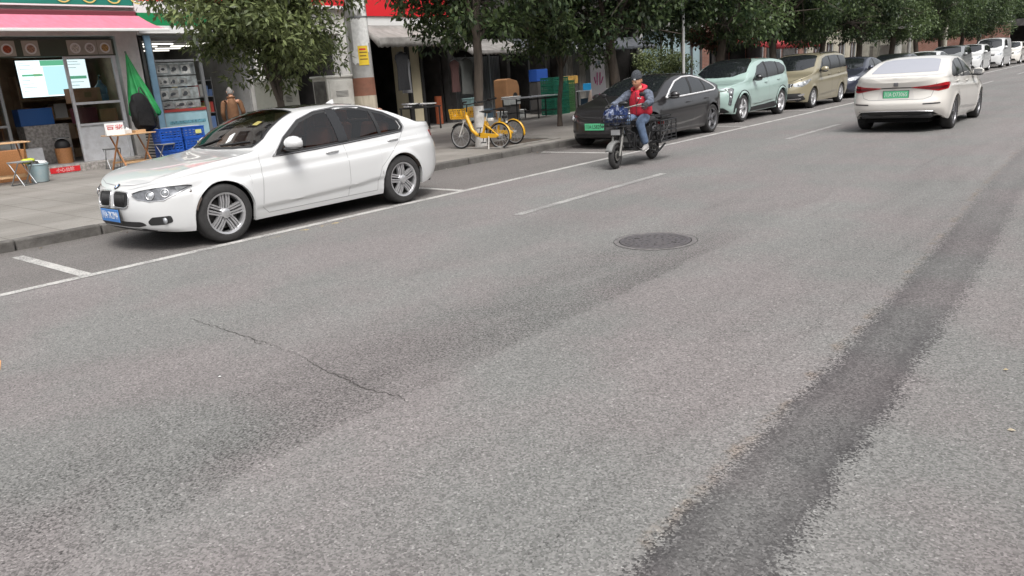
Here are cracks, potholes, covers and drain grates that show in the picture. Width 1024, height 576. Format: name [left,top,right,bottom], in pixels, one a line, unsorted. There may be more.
crack [192,318,406,402]
manhole cover [613,232,698,250]
